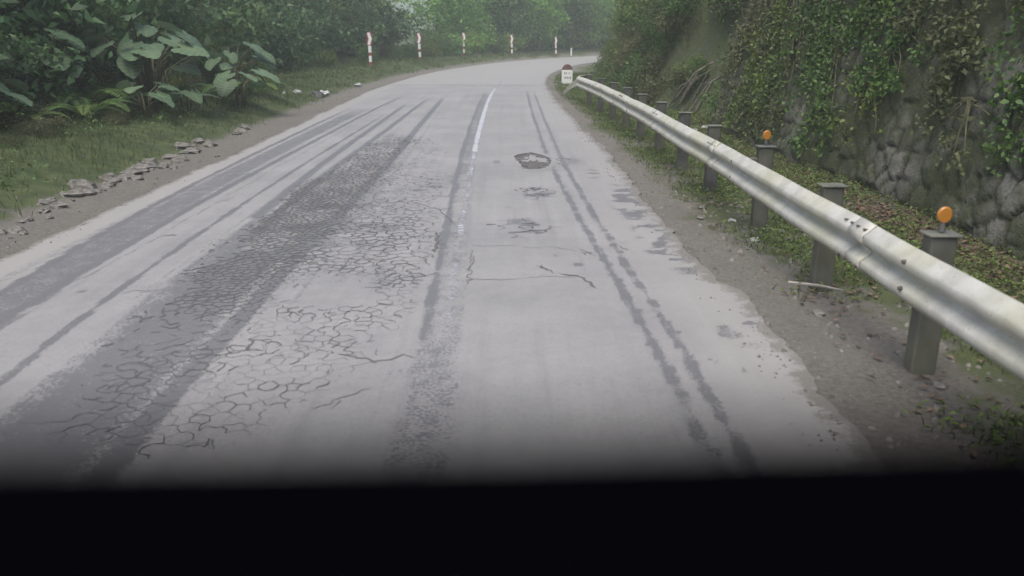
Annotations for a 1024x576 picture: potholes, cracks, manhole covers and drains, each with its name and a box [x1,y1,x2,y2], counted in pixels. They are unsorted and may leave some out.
pothole [506,151,561,171]
crack [22,134,453,428]
crack [466,216,628,287]
